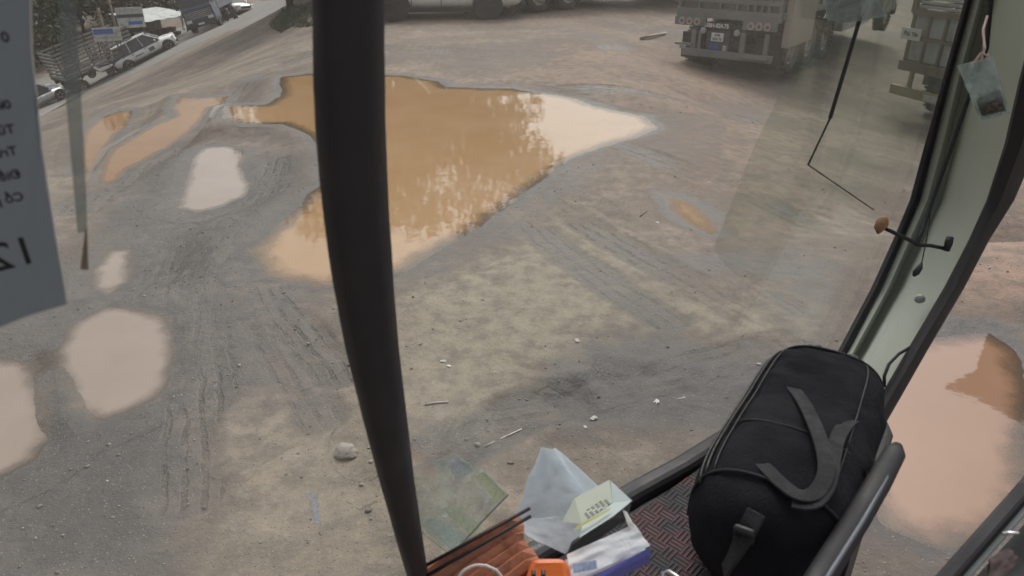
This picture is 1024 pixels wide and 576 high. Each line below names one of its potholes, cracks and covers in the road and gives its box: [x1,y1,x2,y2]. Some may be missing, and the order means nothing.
pothole [67,89,245,191]
pothole [23,288,224,453]
pothole [0,322,100,512]
pothole [201,70,685,303]
